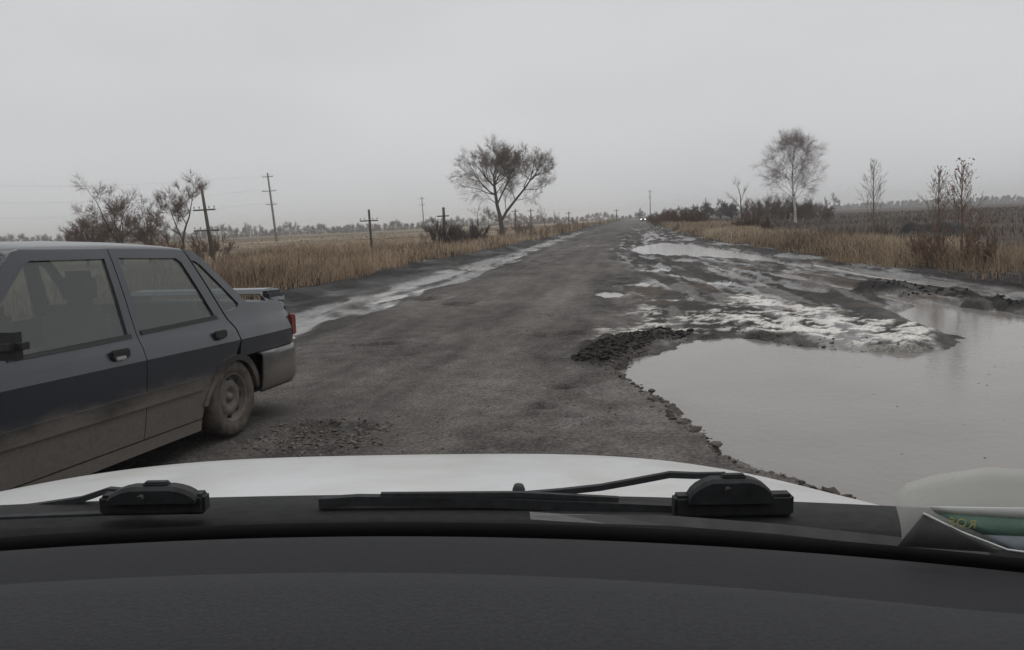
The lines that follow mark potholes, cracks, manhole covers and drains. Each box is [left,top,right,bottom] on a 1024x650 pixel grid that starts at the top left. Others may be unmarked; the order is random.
pothole [570,296,1024,508]
pothole [548,411,603,422]
pothole [587,290,633,299]
pothole [628,242,788,264]
pothole [535,383,590,393]
pothole [232,417,403,457]
pothole [515,401,572,414]
